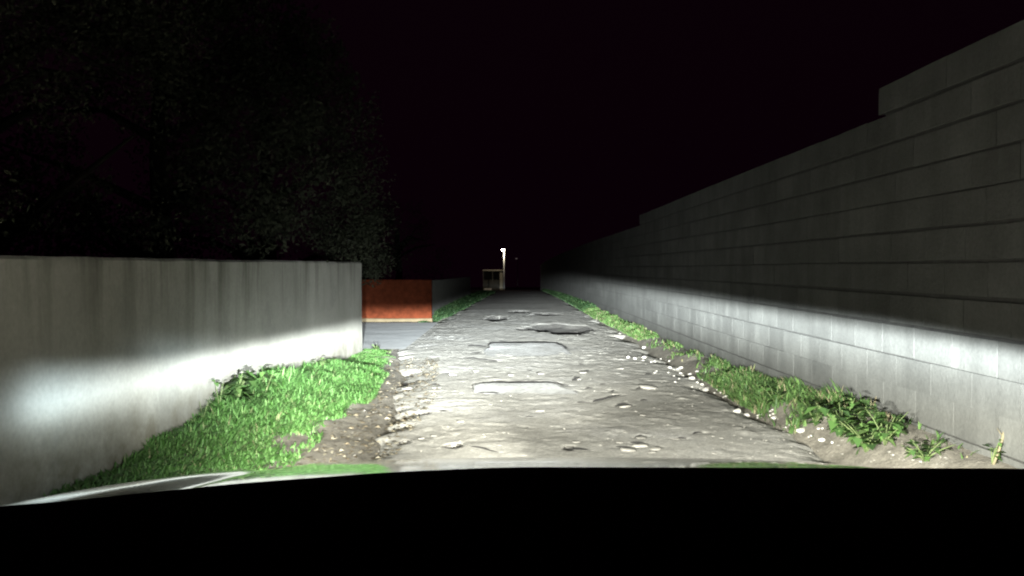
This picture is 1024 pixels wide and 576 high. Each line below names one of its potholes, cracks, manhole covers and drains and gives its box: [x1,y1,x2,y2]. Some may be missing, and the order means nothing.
pothole [527,323,594,335]
